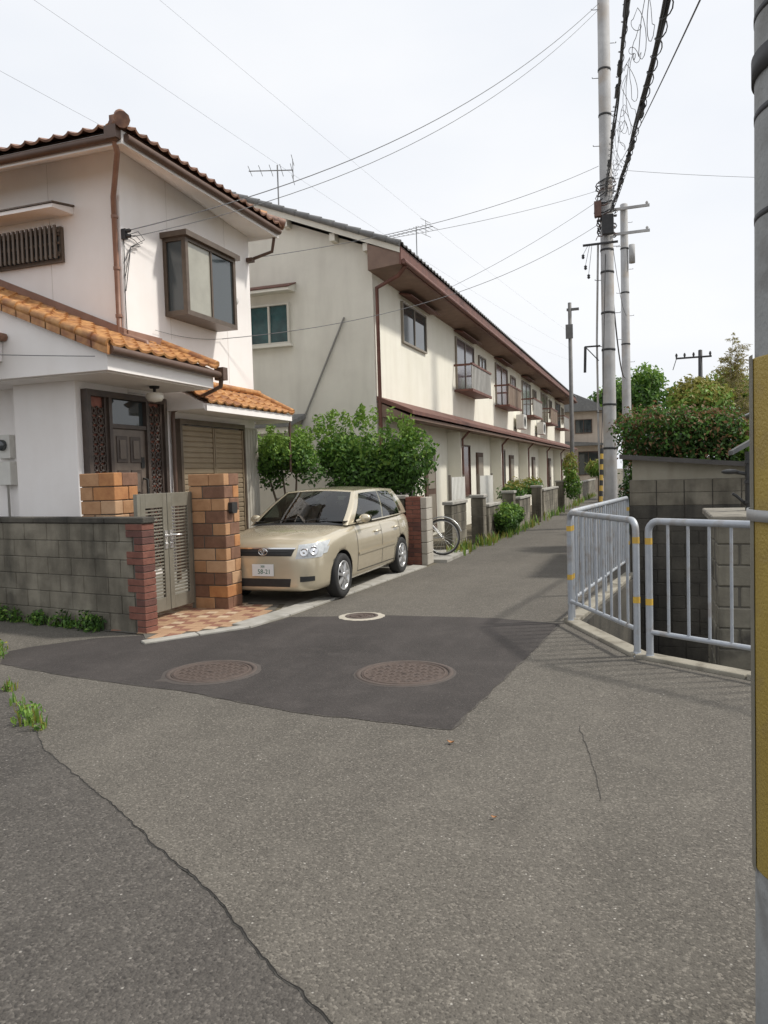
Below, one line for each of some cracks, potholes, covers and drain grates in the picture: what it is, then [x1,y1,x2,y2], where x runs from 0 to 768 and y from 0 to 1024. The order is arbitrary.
manhole cover [156,660,262,685]
crack [579,725,602,801]
manhole cover [353,660,456,688]
manhole cover [339,612,385,621]
crack [35,731,333,1024]
